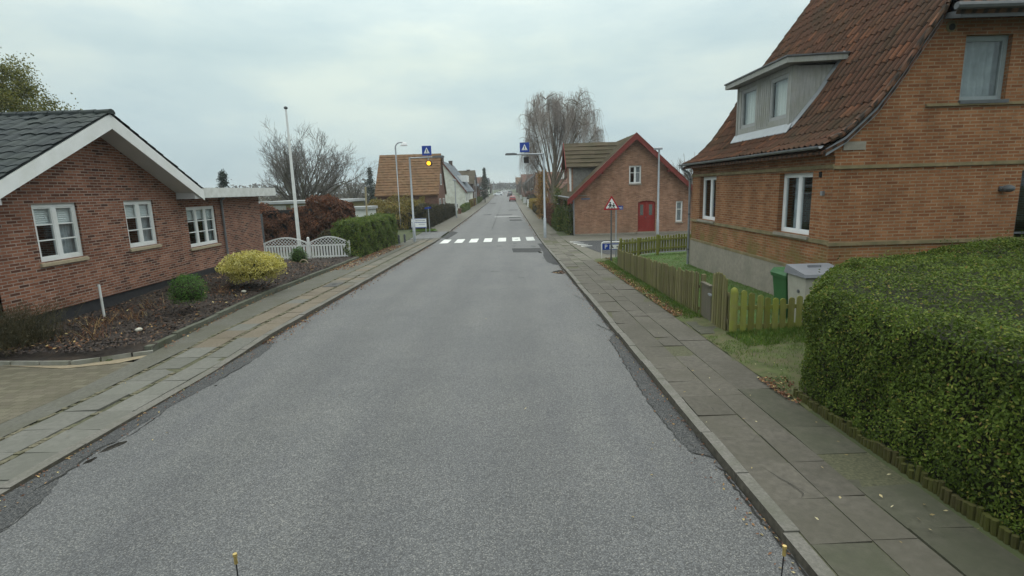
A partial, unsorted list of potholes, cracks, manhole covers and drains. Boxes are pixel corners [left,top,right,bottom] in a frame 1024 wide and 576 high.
crack [1,411,164,530]
